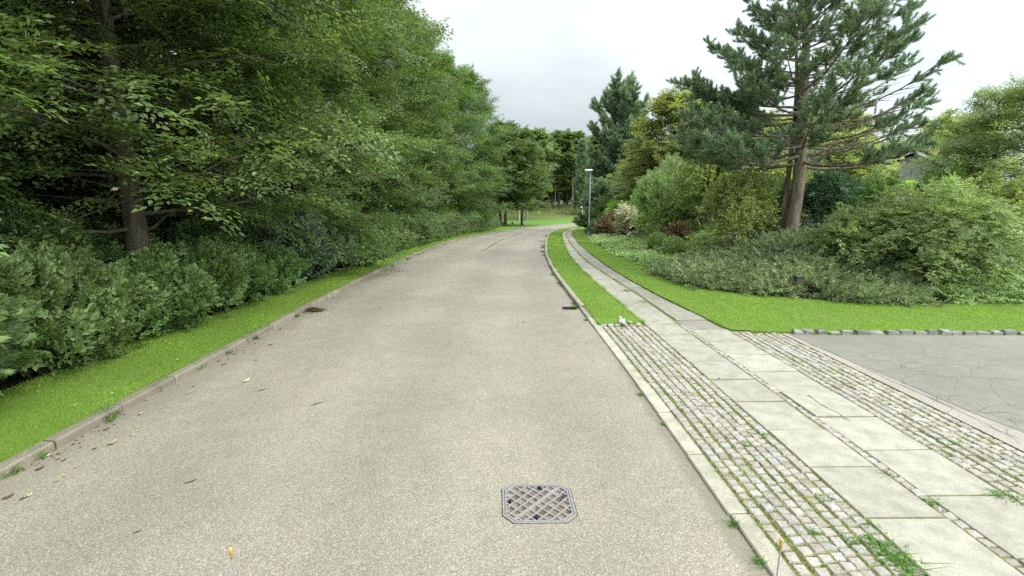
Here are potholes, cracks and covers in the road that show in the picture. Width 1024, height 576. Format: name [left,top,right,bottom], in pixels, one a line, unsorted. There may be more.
crack [863,341,1022,439]
